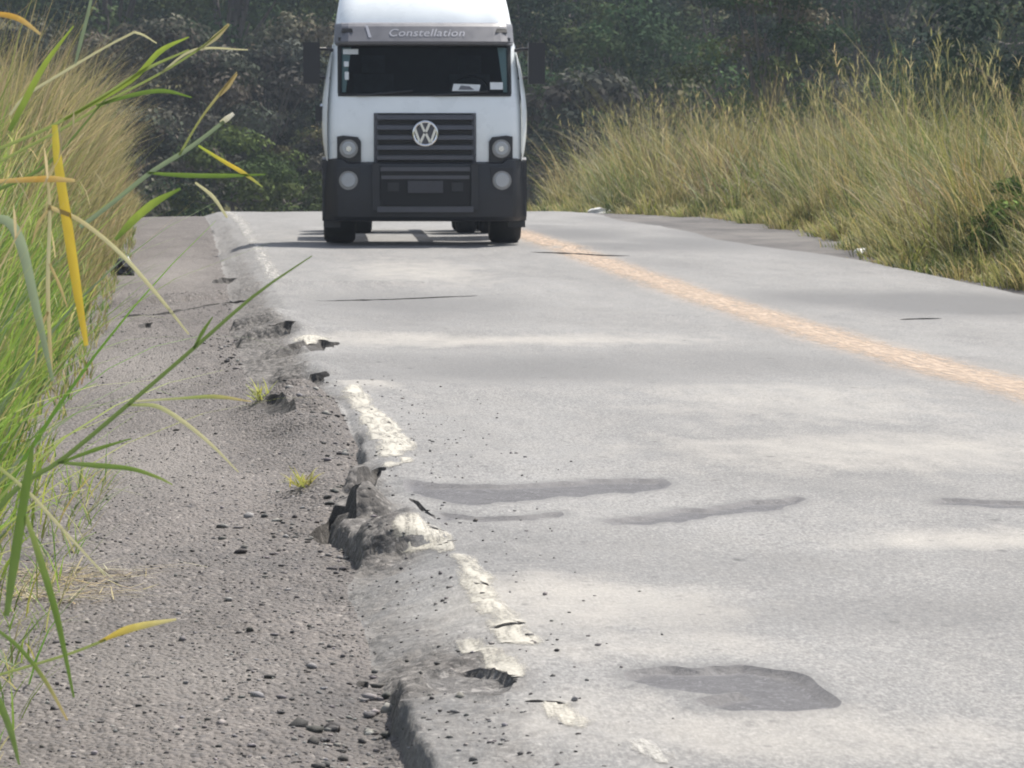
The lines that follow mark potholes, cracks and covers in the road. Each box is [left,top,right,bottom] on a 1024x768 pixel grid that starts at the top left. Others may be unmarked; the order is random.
pothole [357,466,386,486]
pothole [287,340,340,355]
pothole [424,668,518,696]
pothole [264,321,296,336]
pothole [256,392,296,416]
pothole [310,483,361,544]
pothole [308,371,330,388]
